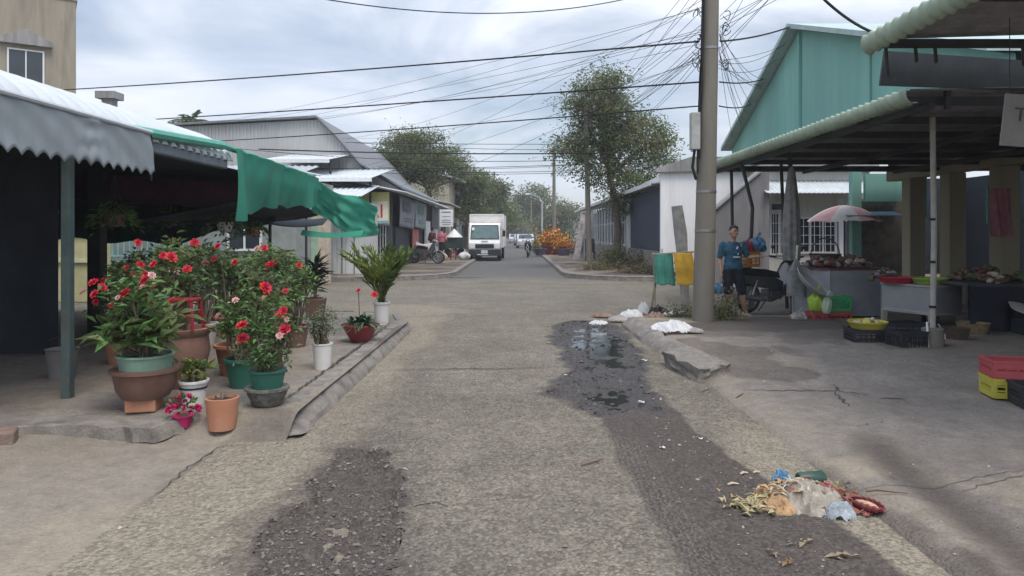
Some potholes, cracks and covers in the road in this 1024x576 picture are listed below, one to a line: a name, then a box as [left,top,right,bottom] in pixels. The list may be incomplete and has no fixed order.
crack [762,384,900,406]
pothole [546,321,662,416]
crack [858,469,1023,491]
